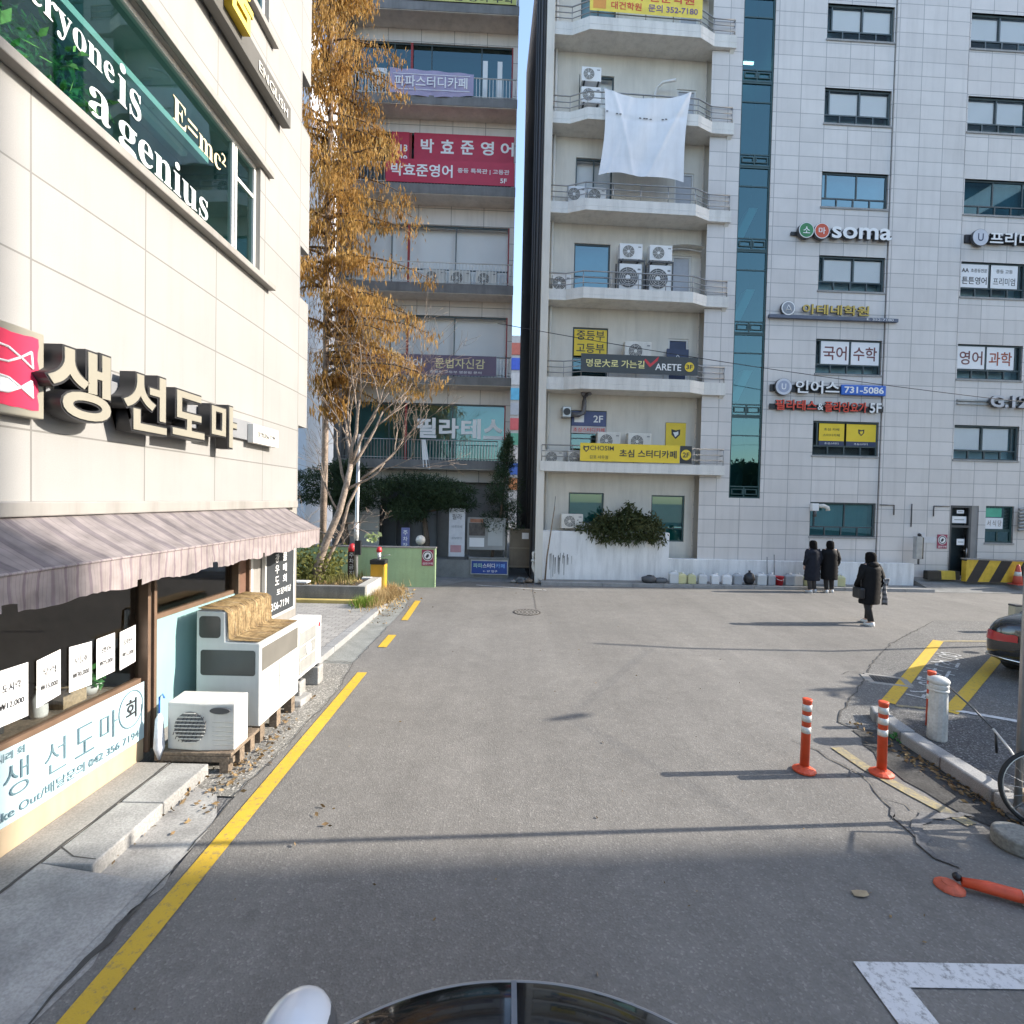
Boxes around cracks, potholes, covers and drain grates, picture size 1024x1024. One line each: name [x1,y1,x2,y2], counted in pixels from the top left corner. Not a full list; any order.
drain grate [860,673,914,688]
crack [792,739,915,836]
